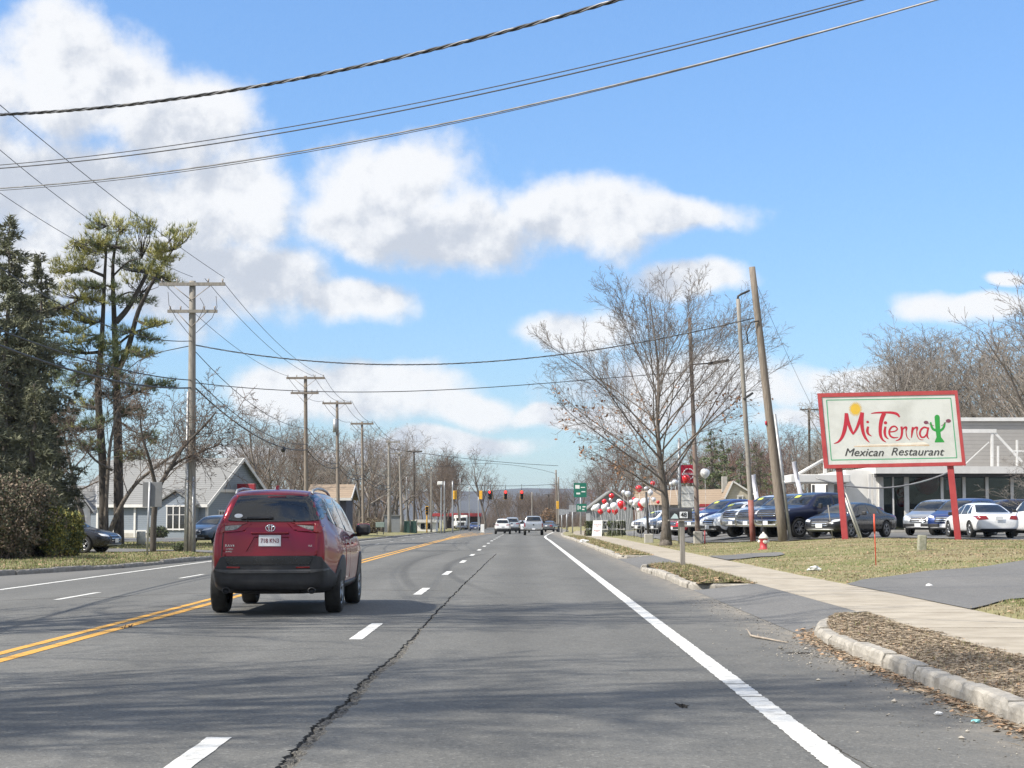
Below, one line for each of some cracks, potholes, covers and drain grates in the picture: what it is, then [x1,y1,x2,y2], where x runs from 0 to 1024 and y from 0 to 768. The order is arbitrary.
crack [5,554,496,768]
